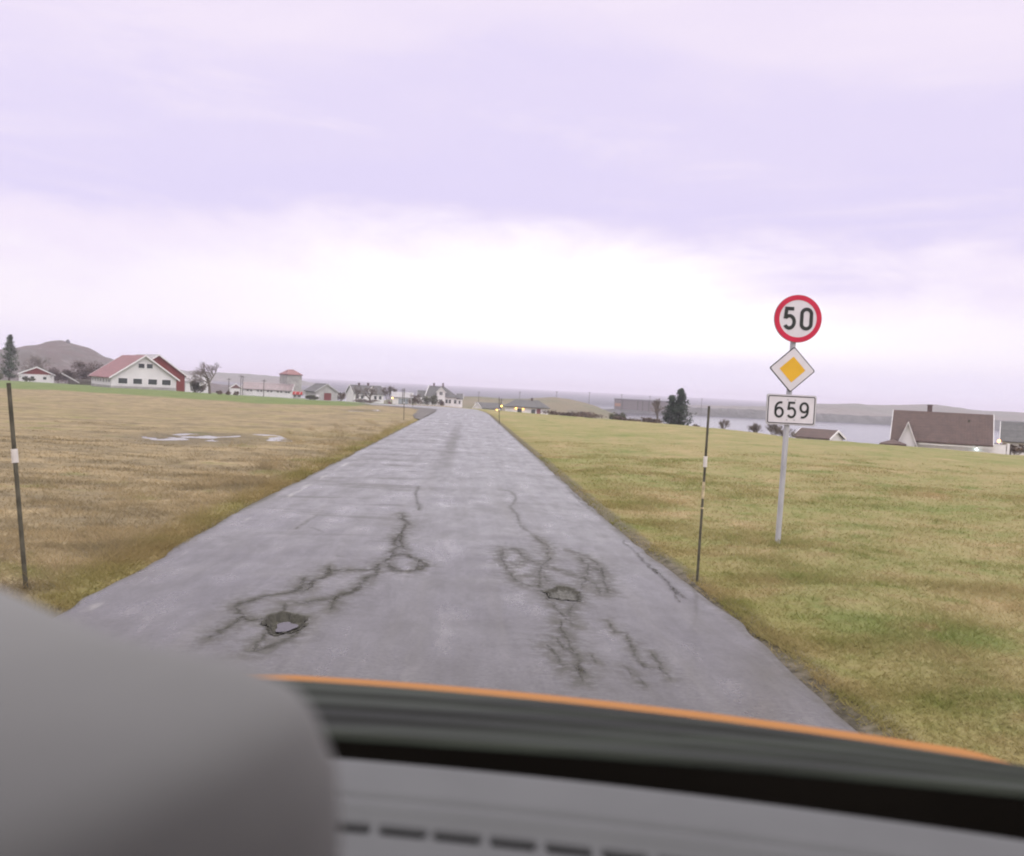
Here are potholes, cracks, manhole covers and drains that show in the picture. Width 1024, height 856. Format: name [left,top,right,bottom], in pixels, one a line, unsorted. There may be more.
crack [219,517,429,647]
pothole [544,586,582,601]
pothole [261,611,308,636]
